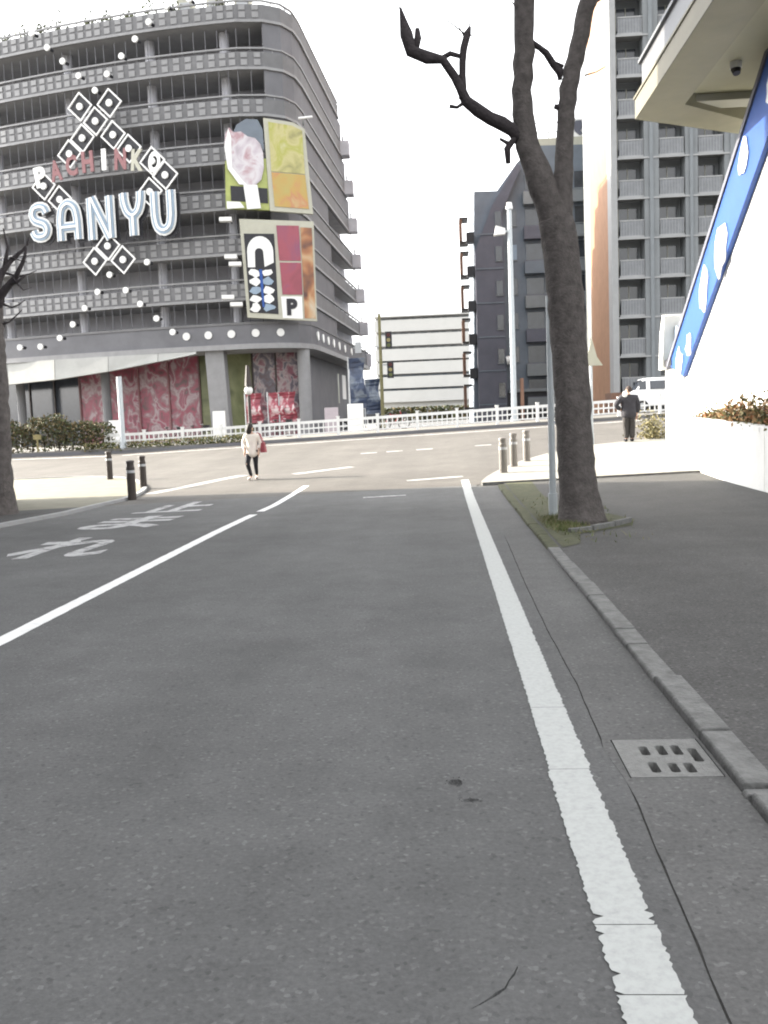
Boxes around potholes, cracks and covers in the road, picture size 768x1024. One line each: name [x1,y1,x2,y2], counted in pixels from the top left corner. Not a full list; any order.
crack [471,966,518,1009]
drain grate [610,739,726,779]
